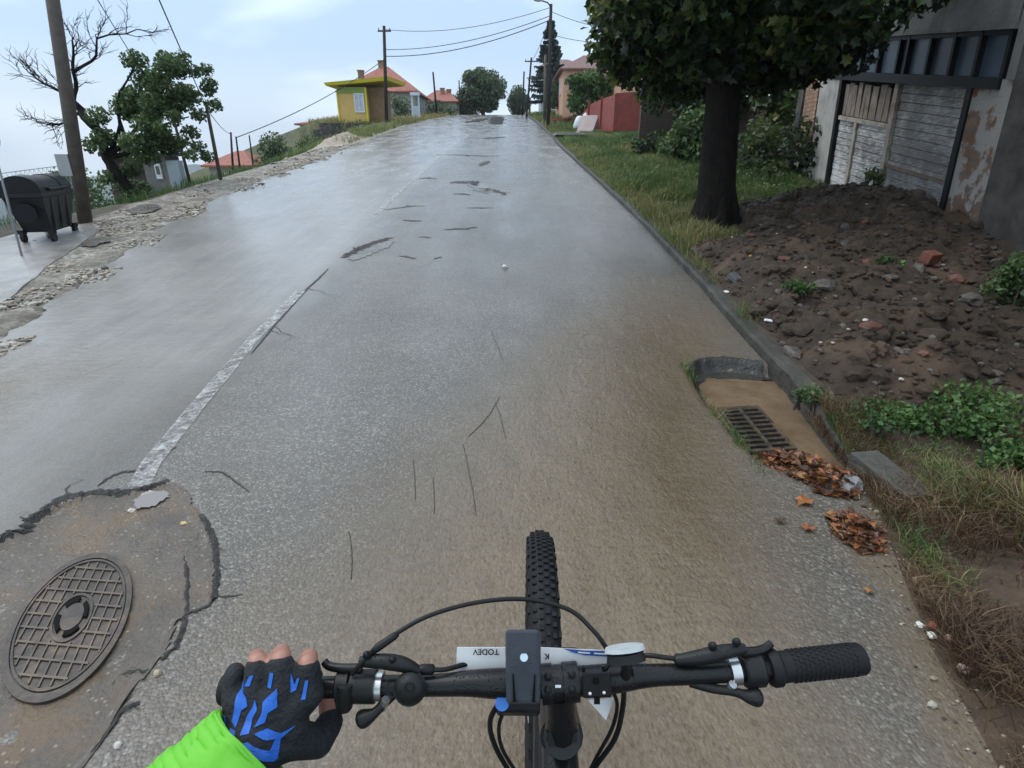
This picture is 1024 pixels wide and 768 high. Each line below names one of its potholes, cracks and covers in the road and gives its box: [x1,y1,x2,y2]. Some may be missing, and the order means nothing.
drain grate [717,405,797,454]
pothole [348,240,393,260]
crack [0,446,243,751]
crack [420,161,506,209]
crack [340,205,475,259]
manhole cover [2,553,133,705]
crack [463,397,506,513]
